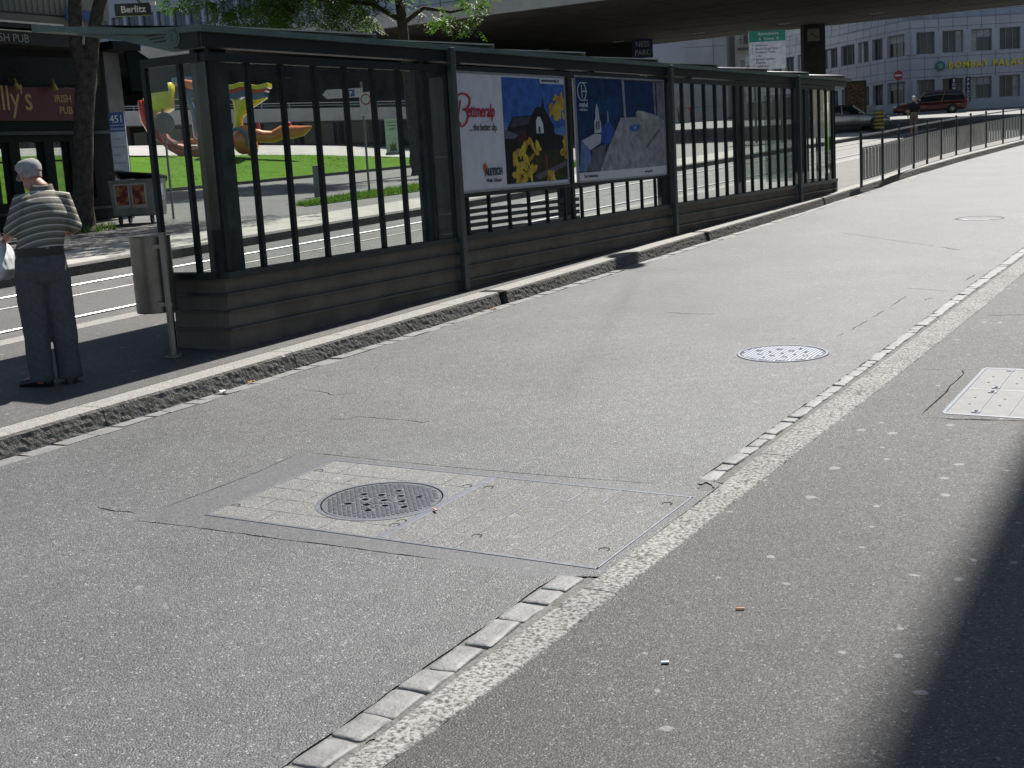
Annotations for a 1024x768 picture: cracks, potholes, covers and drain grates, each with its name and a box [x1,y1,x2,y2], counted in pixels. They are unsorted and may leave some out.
manhole cover [315,481,448,529]
utility cover [942,367,1024,421]
utility cover [205,460,692,569]
manhole cover [737,345,829,363]
